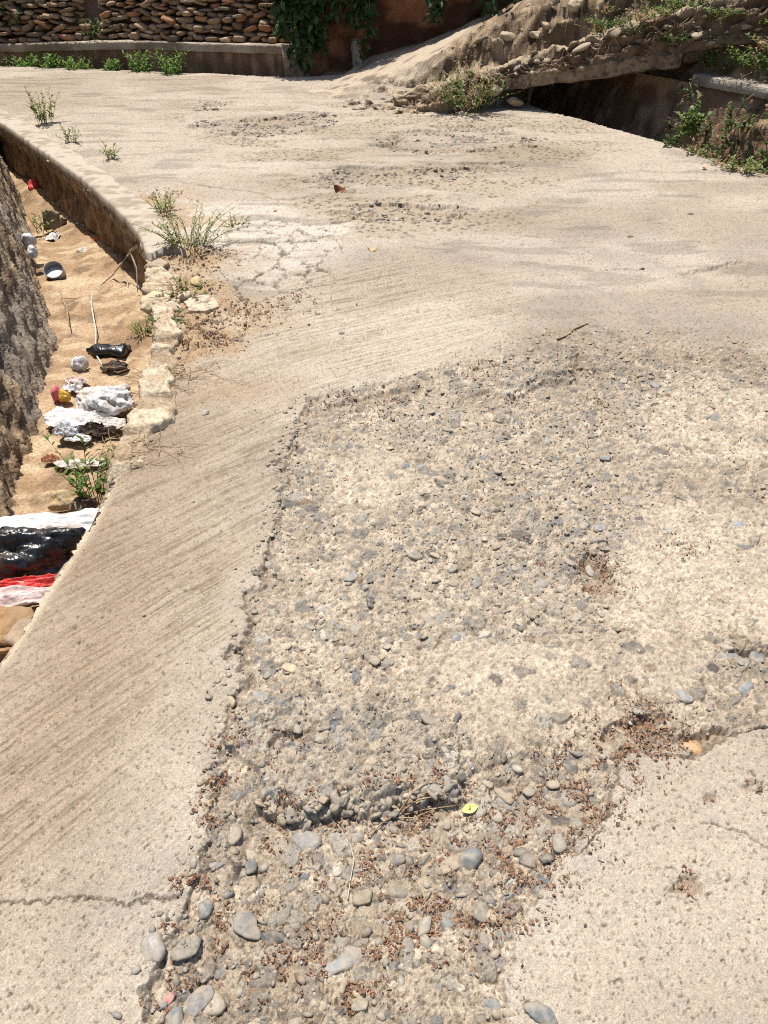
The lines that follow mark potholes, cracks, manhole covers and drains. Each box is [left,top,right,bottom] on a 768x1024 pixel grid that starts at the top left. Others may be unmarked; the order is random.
pothole [307,383,433,426]
pothole [596,705,673,743]
pothole [146,744,608,1024]
pothole [667,874,718,903]
pothole [741,777,762,794]
crack [580,725,768,854]
pothole [267,722,323,751]
crack [0,891,183,908]
pothole [703,789,720,807]
pothole [671,724,734,757]
